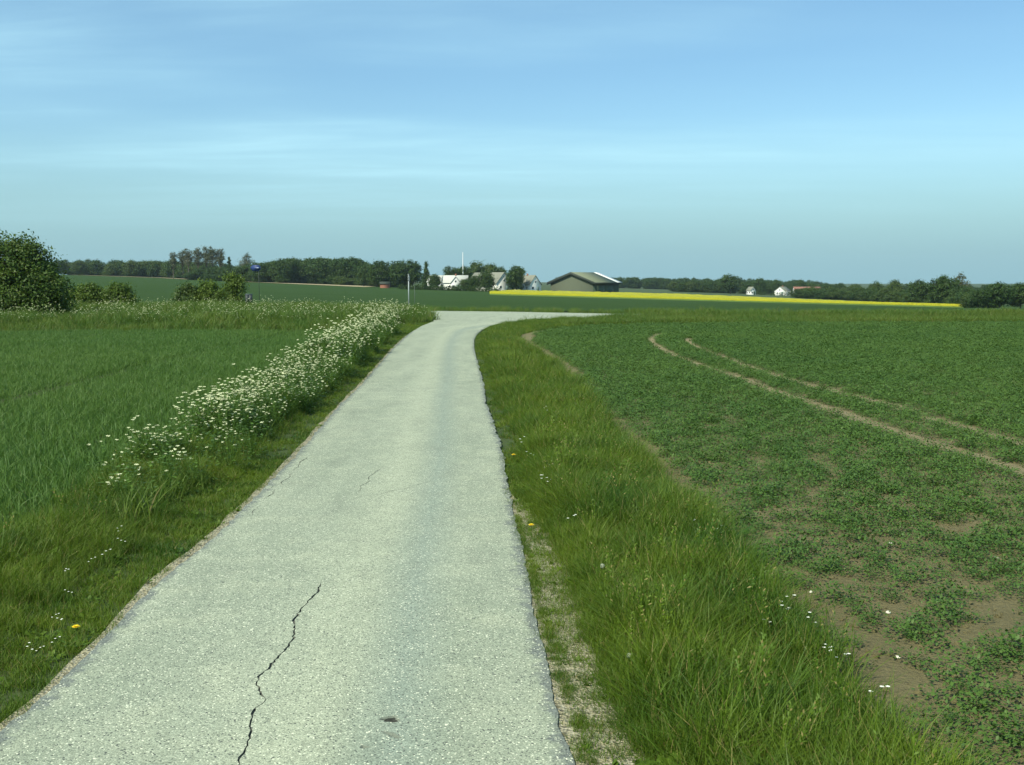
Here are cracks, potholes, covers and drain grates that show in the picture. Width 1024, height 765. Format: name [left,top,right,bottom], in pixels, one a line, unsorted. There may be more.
crack [237,584,321,765]
